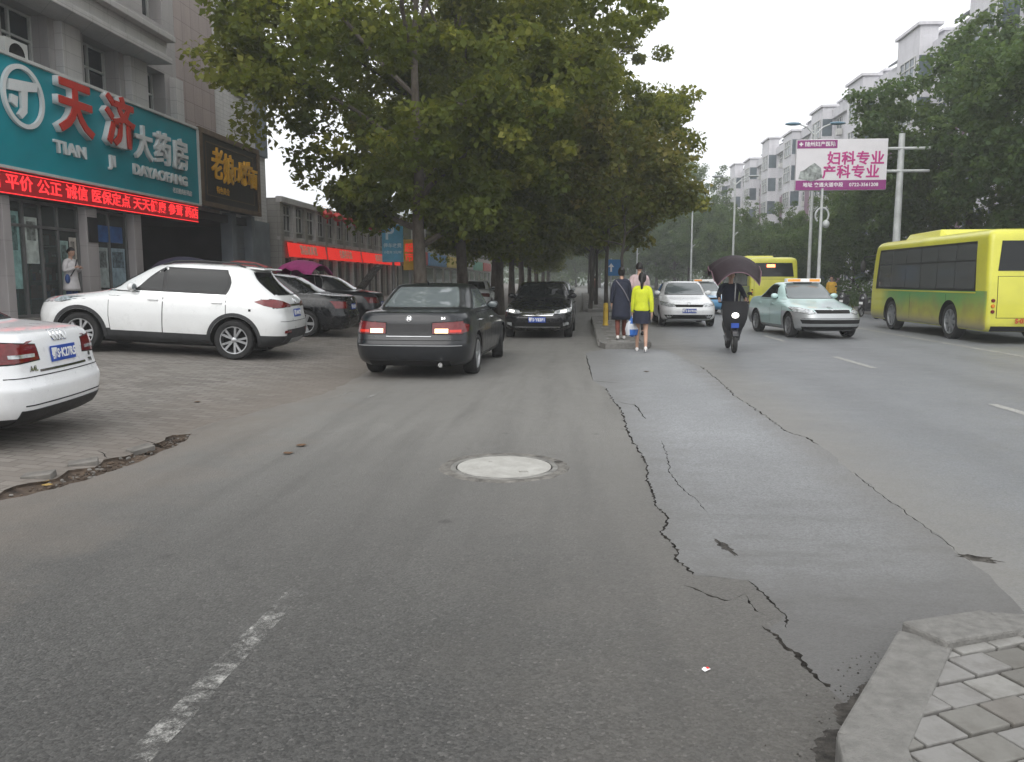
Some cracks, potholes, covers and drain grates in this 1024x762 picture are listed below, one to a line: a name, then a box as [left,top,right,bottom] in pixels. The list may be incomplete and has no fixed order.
crack [586,357,831,687]
crack [849,470,972,563]
pothole [0,434,191,500]
manhole cover [439,453,570,483]
pothole [715,539,738,556]
